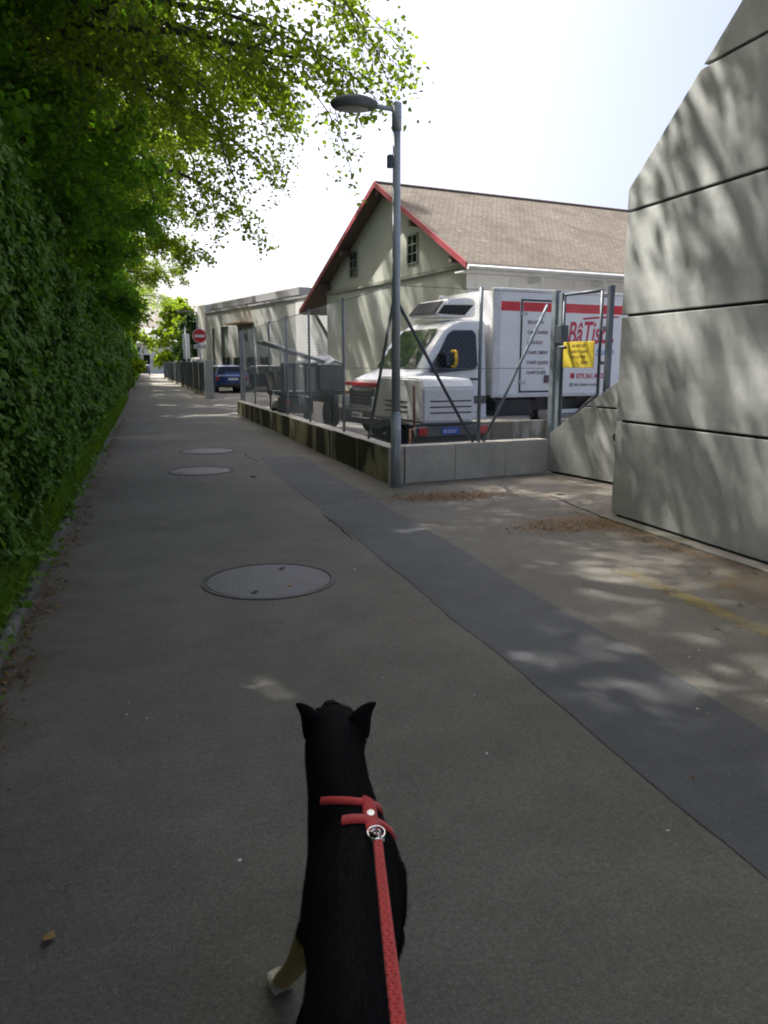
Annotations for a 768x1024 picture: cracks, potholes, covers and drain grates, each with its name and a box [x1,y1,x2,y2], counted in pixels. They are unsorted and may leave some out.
manhole cover [167,466,234,476]
manhole cover [201,563,336,600]
